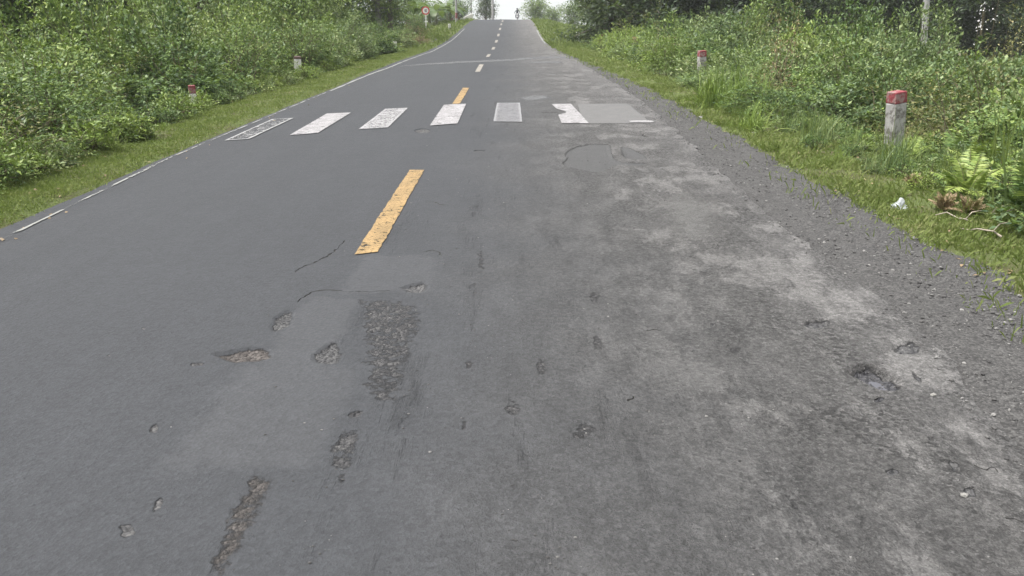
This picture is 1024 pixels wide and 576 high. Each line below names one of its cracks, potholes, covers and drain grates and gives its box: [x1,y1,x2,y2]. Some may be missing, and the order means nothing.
pothole [116,522,138,538]
pothole [310,341,346,365]
pothole [148,422,161,434]
pothole [210,346,274,364]
pothole [398,281,430,293]
crack [298,290,390,302]
pothole [268,309,297,332]
pothole [844,363,906,391]
pothole [150,494,166,514]
